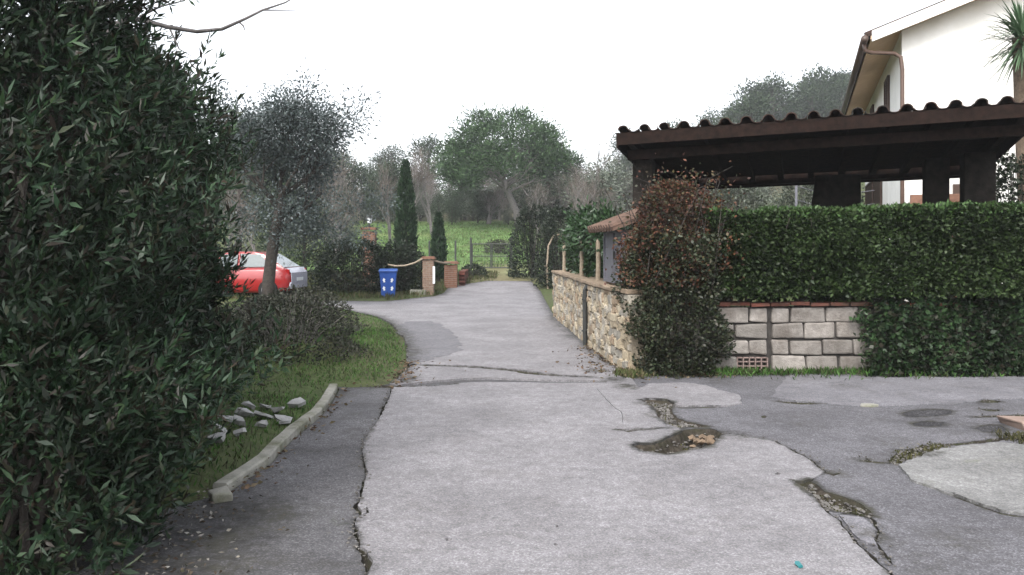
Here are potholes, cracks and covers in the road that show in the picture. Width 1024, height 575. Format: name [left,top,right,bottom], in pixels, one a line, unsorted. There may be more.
crack [341,364,590,575]
pothole [635,429,723,454]
crack [812,502,896,575]
crack [858,399,1024,466]
pothole [644,400,707,428]
